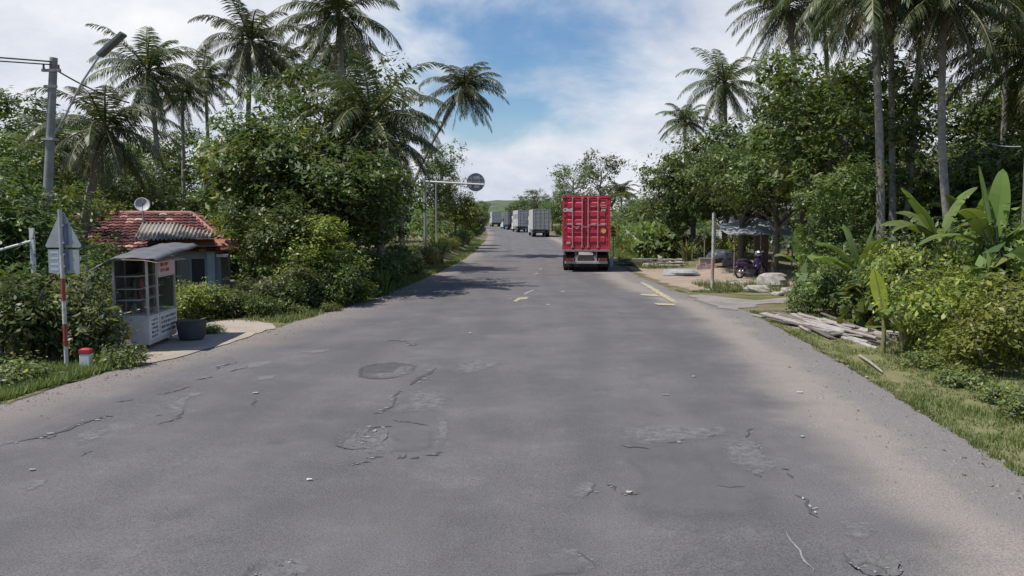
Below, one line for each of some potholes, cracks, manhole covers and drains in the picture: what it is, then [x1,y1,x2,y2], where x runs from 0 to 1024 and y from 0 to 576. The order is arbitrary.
crack [156,362,248,425]
crack [781,468,820,569]
crack [347,368,442,465]
pothole [335,428,388,449]
crack [2,399,133,456]
pothole [843,549,904,576]
crack [587,484,638,495]
